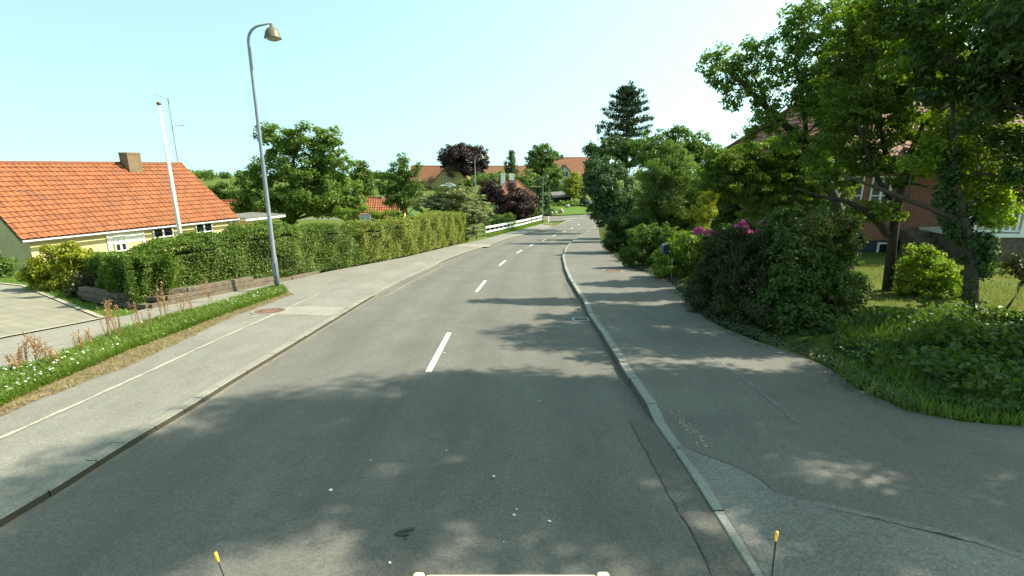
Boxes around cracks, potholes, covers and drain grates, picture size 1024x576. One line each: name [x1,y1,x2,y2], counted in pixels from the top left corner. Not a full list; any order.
manhole cover [250,307,288,315]
crack [632,426,711,576]
